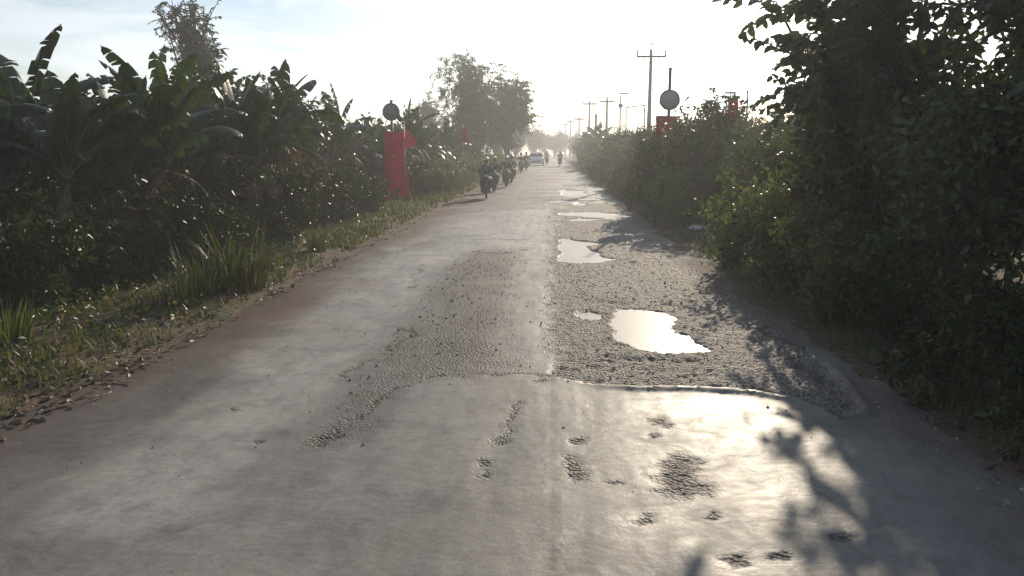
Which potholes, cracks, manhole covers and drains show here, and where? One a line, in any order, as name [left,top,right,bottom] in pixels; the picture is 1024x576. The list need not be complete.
pothole [556,451,604,486]
pothole [479,436,518,449]
pothole [637,450,728,513]
pothole [568,309,611,321]
pothole [465,454,504,469]
pothole [466,467,506,484]
pothole [548,237,624,264]
pothole [602,307,721,356]
